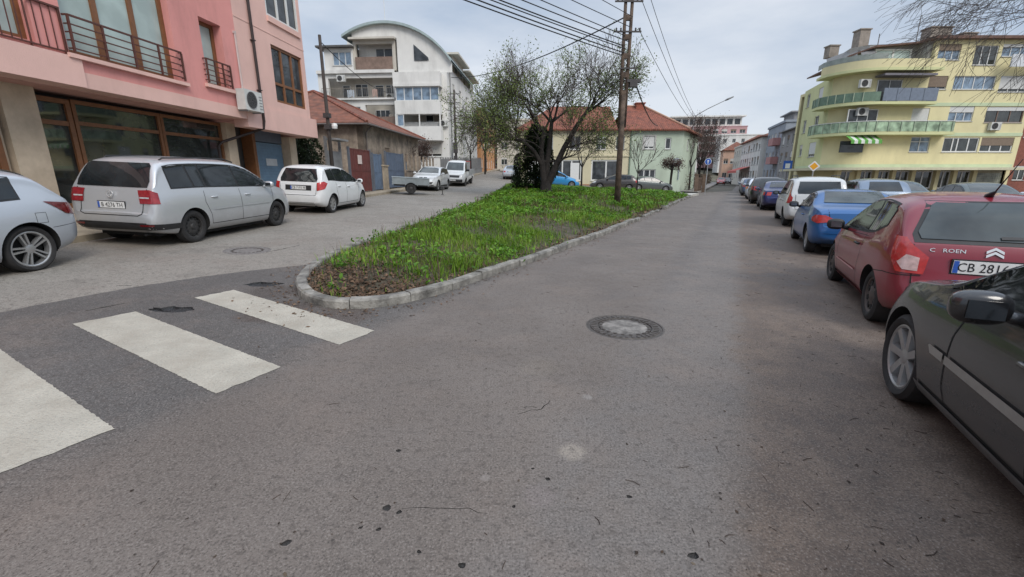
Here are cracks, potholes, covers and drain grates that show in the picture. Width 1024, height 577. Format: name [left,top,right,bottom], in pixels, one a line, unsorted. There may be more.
manhole cover [586,315,665,340]
manhole cover [222,246,272,255]
